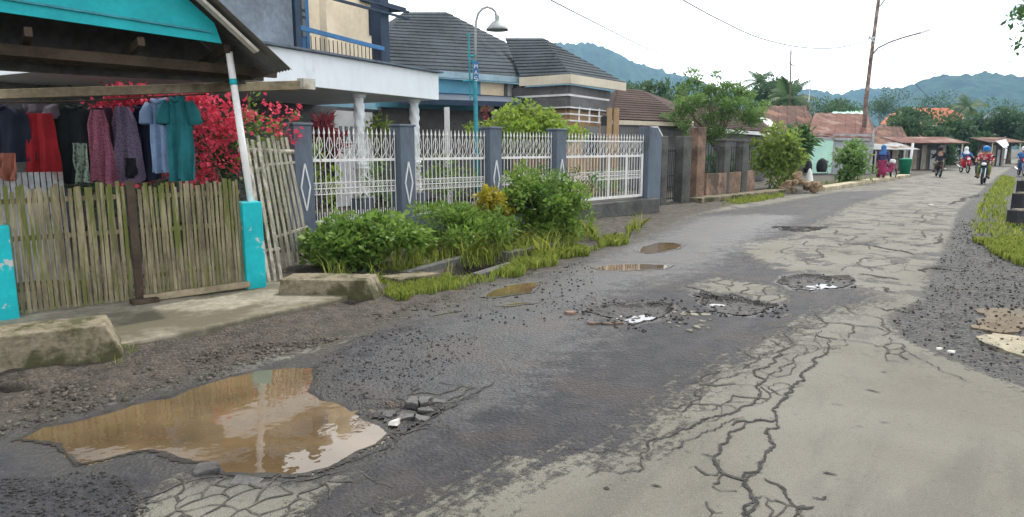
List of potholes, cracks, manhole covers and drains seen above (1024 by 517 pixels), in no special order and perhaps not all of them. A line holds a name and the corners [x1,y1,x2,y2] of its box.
pothole [693,291,780,316]
pothole [479,281,543,299]
crack [139,378,496,517]
crack [569,199,963,517]
pothole [586,301,674,324]
pothole [591,263,674,271]
pothole [11,366,398,478]
pothole [633,242,685,254]
pothole [777,273,855,292]
